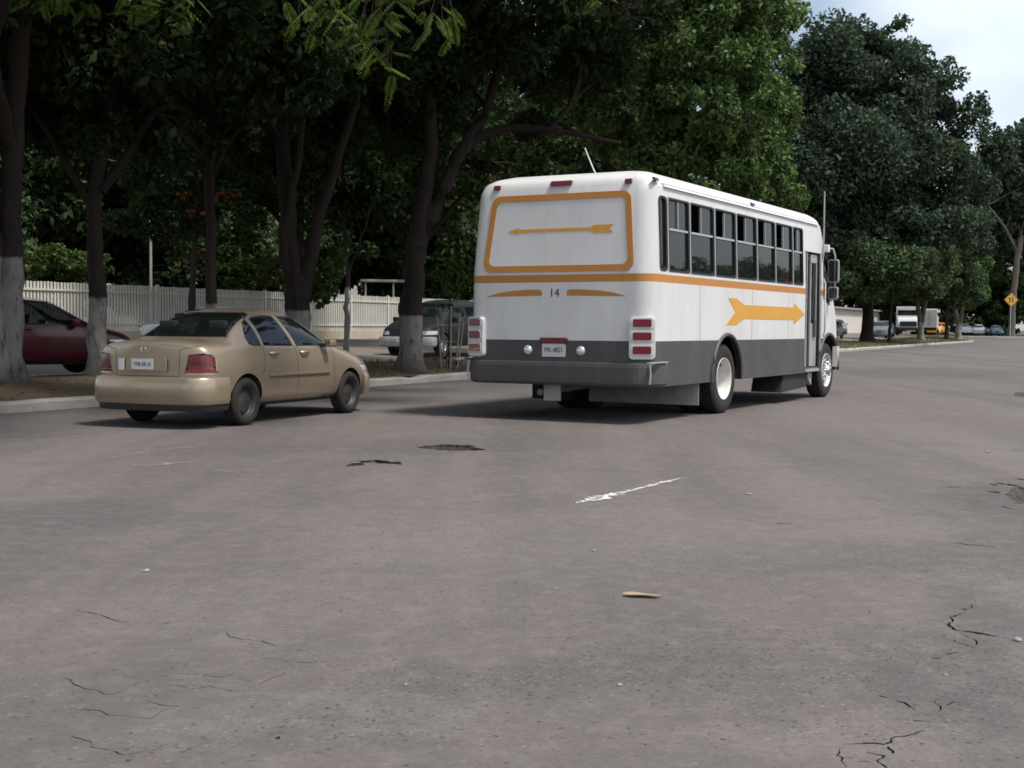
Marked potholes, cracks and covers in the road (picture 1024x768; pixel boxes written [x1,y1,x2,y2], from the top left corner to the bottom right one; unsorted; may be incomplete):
crack [66,632,326,755]
pothole [987,479,1024,509]
crack [836,695,961,768]
crack [930,600,1005,659]
